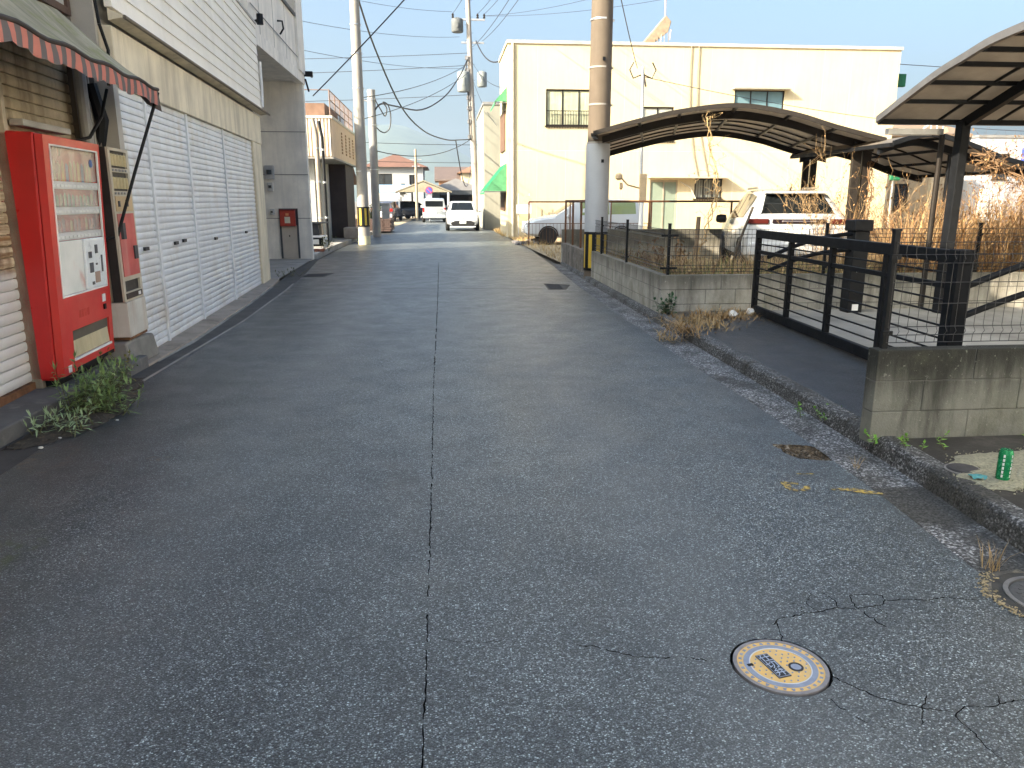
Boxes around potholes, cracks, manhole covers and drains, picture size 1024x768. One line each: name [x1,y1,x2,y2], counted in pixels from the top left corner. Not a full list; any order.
crack [831,677,1024,764]
utility cover [944,463,980,474]
crack [421,263,491,768]
crack [571,644,707,661]
pothole [773,444,832,461]
manhole cover [730,639,833,697]
crack [773,589,981,641]
